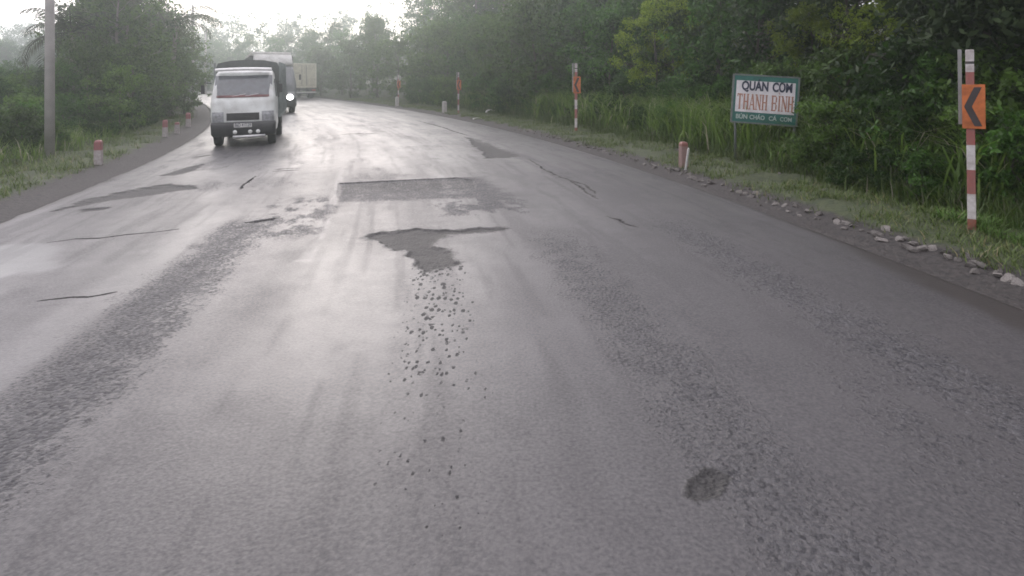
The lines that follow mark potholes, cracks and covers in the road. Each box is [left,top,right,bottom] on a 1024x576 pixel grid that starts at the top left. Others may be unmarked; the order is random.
crack [7,285,142,310]
crack [26,225,194,247]
crack [589,213,656,231]
pothole [338,223,526,279]
crack [181,154,313,192]
